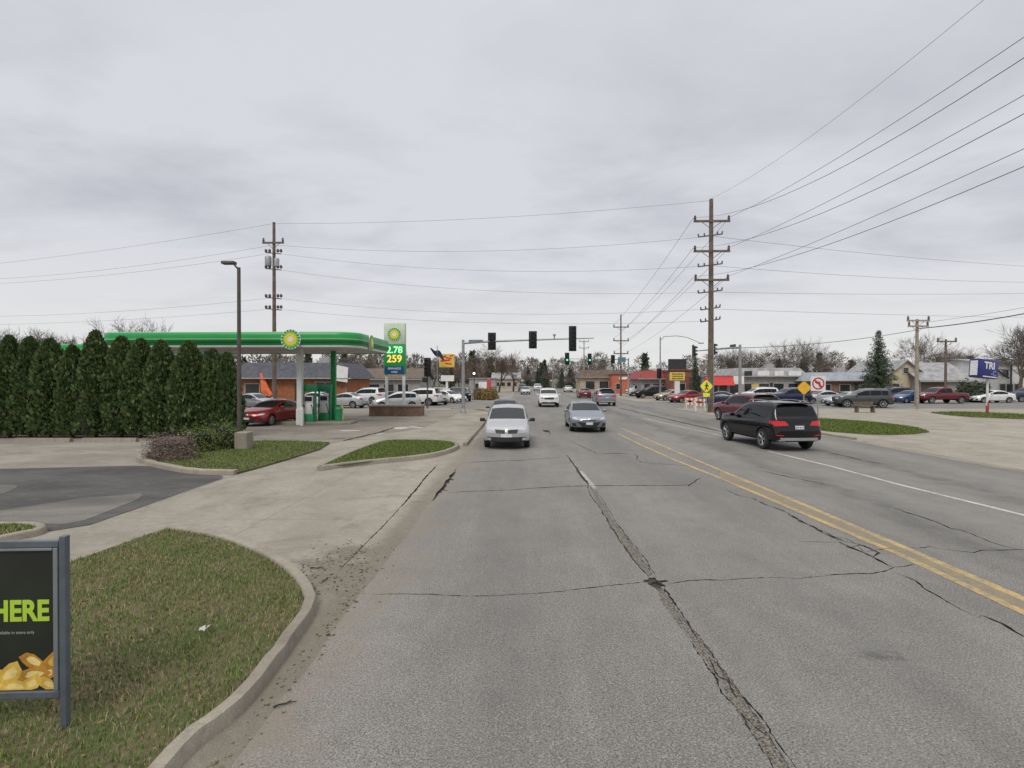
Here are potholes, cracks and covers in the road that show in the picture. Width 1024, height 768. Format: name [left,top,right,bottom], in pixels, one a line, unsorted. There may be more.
crack [372,582,641,596]
crack [671,491,1024,637]
crack [451,442,700,493]
